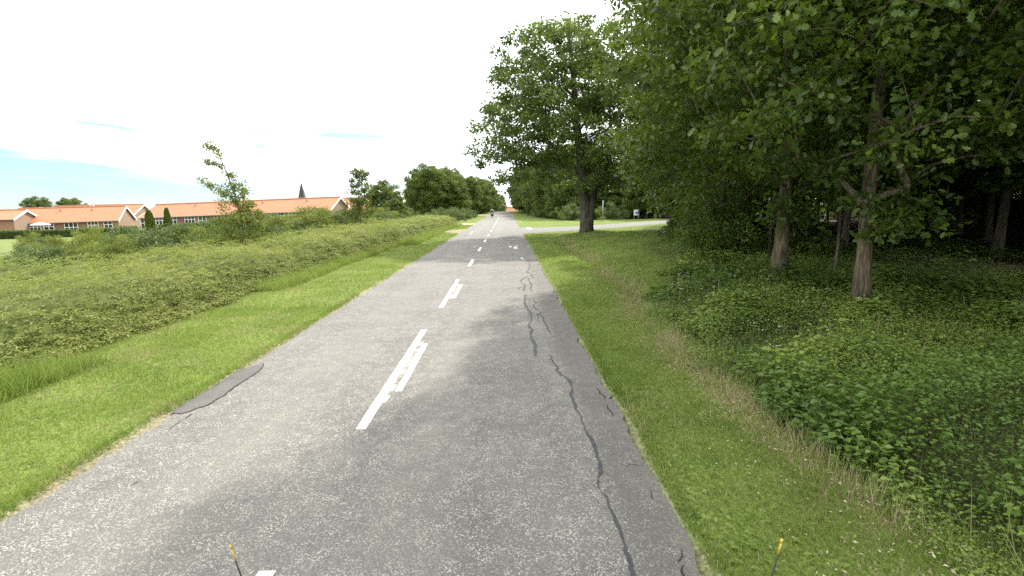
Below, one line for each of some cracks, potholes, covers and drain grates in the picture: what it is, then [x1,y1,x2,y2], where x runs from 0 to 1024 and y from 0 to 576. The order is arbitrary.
crack [518,259,550,332]
